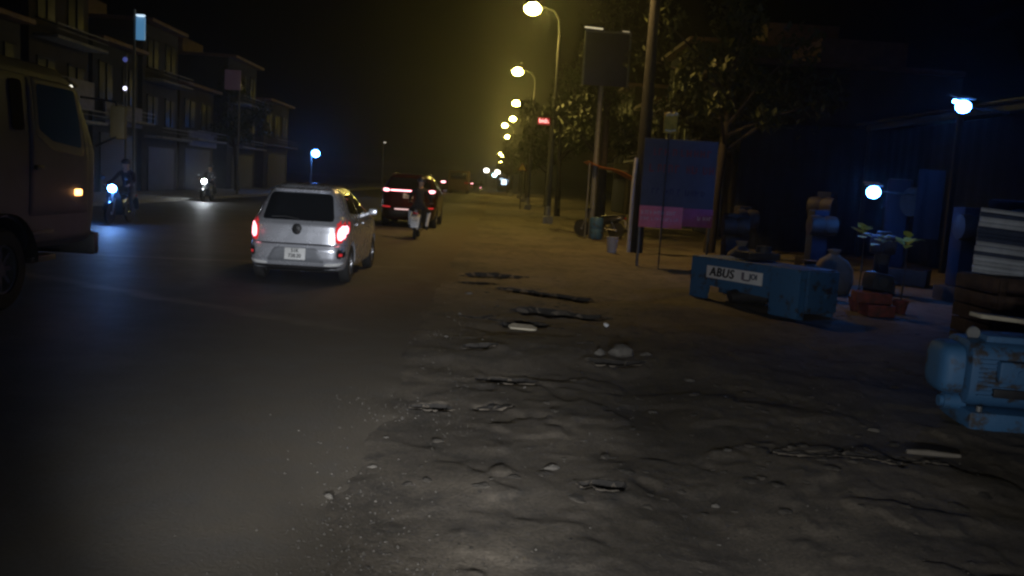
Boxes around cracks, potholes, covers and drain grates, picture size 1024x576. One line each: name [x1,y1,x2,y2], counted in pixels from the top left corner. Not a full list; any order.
pothole [576,479,629,492]
pothole [494,287,599,304]
crack [773,449,951,467]
pothole [458,272,532,280]
pothole [408,403,455,412]
pothole [472,377,540,385]
pothole [495,320,551,329]
pothole [505,306,613,323]
pothole [584,357,648,368]
